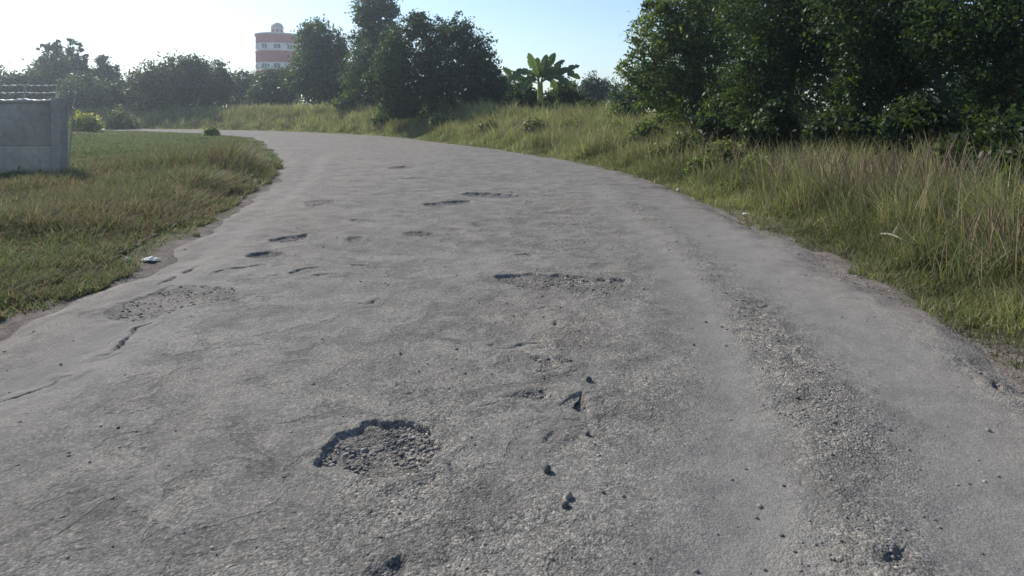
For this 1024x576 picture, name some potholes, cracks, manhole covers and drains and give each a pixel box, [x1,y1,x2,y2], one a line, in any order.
pothole [451,191,530,199]
pothole [234,250,300,262]
pothole [256,232,318,245]
pothole [490,382,580,414]
pothole [298,414,468,493]
pothole [414,199,481,208]
crack [0,319,167,408]
pothole [483,271,637,299]
